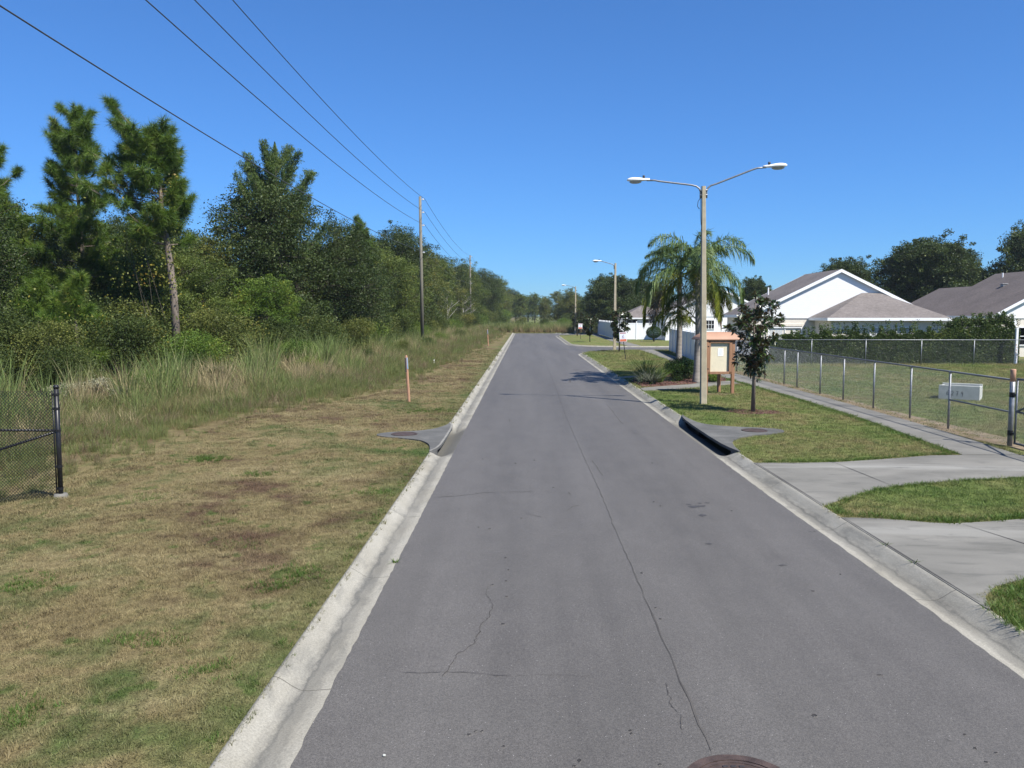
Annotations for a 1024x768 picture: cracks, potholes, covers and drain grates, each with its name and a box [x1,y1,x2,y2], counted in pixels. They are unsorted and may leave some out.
manhole cover [688,754,780,768]
drain grate [682,415,784,454]
drain grate [377,422,453,456]
crack [400,587,494,676]
